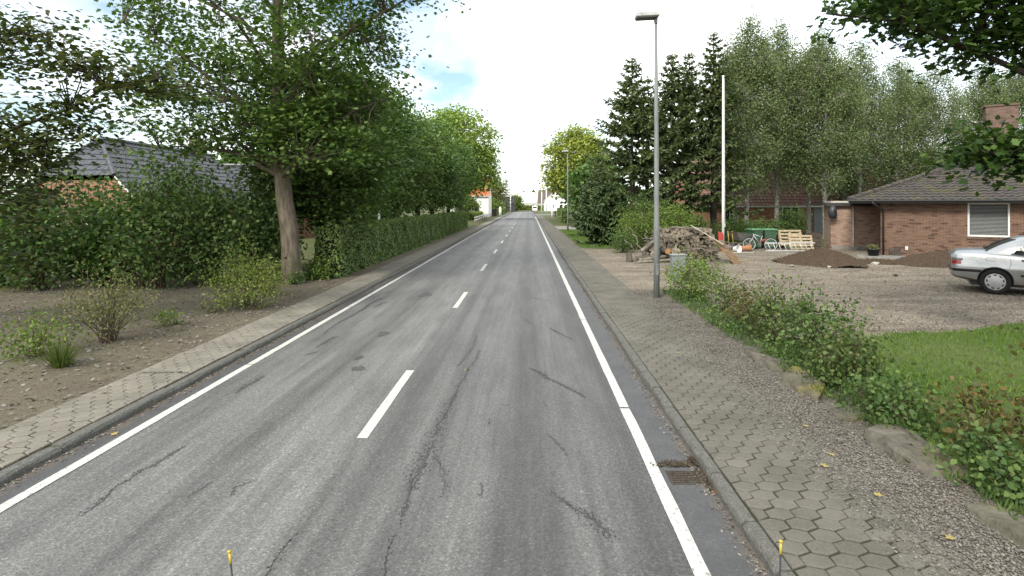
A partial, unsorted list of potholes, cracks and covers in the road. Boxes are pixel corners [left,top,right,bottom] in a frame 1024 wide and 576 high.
crack [382,335,481,576]
crack [550,490,620,543]
crack [531,368,585,397]
crack [79,446,185,516]
crack [265,533,297,576]
